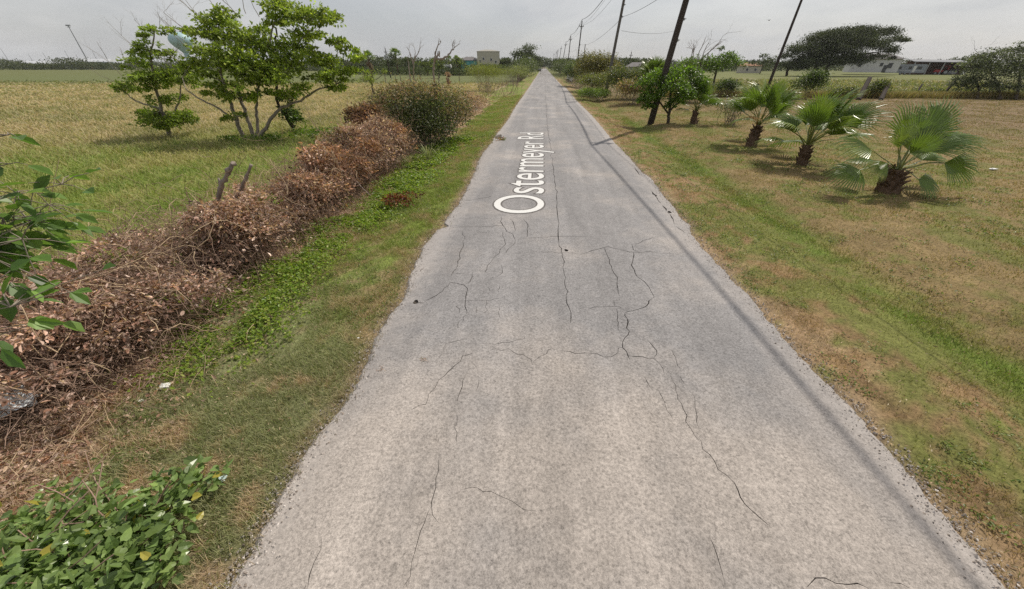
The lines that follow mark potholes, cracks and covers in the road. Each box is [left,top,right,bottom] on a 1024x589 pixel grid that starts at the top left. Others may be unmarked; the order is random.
crack [413,219,773,529]
crack [405,414,532,584]
crack [807,577,909,588]
